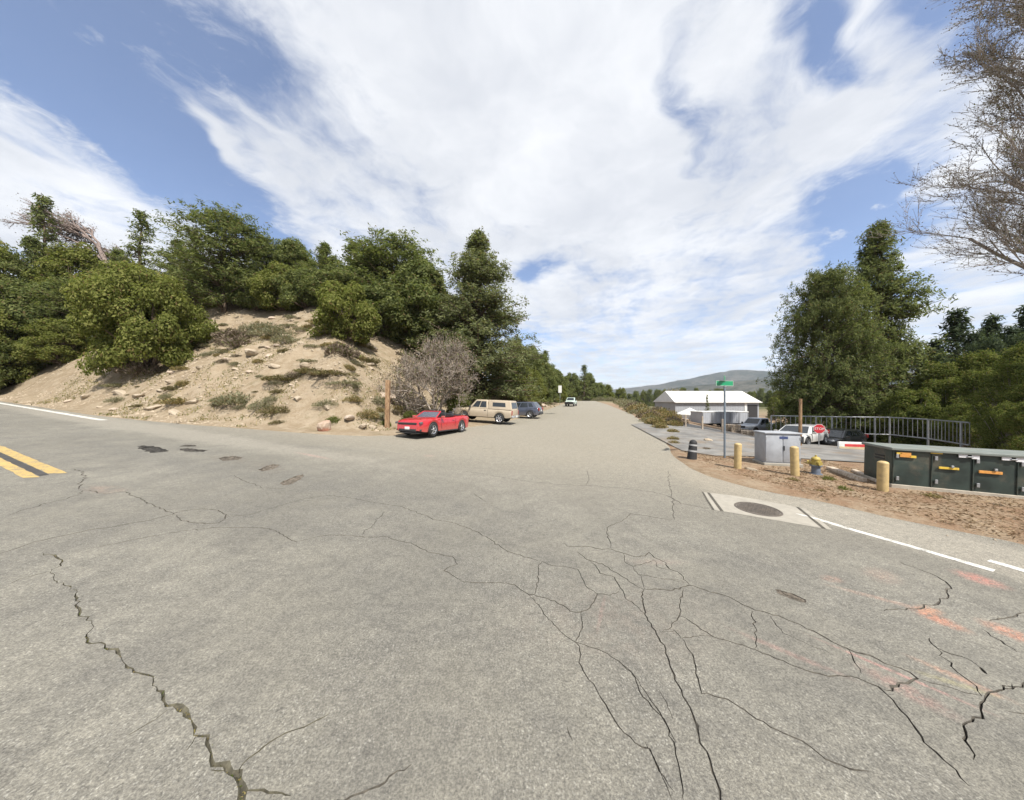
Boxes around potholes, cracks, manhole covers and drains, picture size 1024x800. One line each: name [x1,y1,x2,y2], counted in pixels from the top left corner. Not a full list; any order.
crack [0,469,1024,800]
manhole cover [734,502,783,517]
